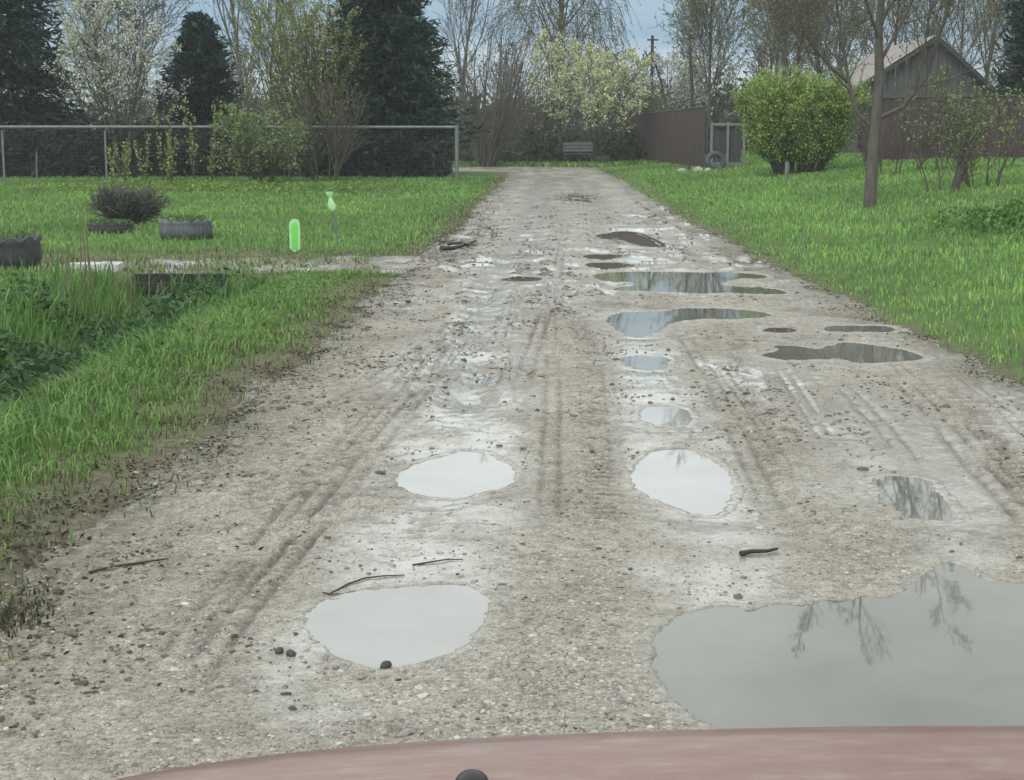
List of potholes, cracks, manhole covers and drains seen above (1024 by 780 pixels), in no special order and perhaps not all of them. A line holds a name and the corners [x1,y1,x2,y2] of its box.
pothole [599,307,781,339]
pothole [609,354,682,372]
pothole [854,472,972,524]
pothole [384,449,526,501]
pothole [587,271,795,295]
pothole [289,581,504,673]
pothole [636,559,1024,729]
pothole [748,341,934,365]
pothole [595,231,667,247]
pothole [621,446,746,519]
pothole [813,324,912,333]
pothole [631,404,701,428]
